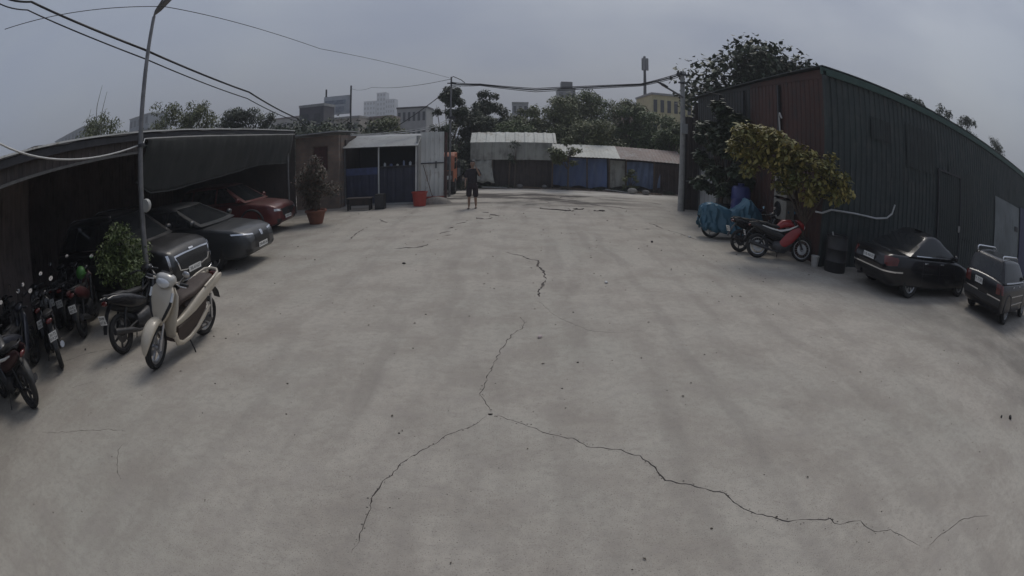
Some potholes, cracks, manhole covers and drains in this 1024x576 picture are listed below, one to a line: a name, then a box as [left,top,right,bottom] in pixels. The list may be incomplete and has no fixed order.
crack [507,252,630,333]
crack [396,206,506,249]
crack [352,317,916,550]
crack [526,196,625,209]
